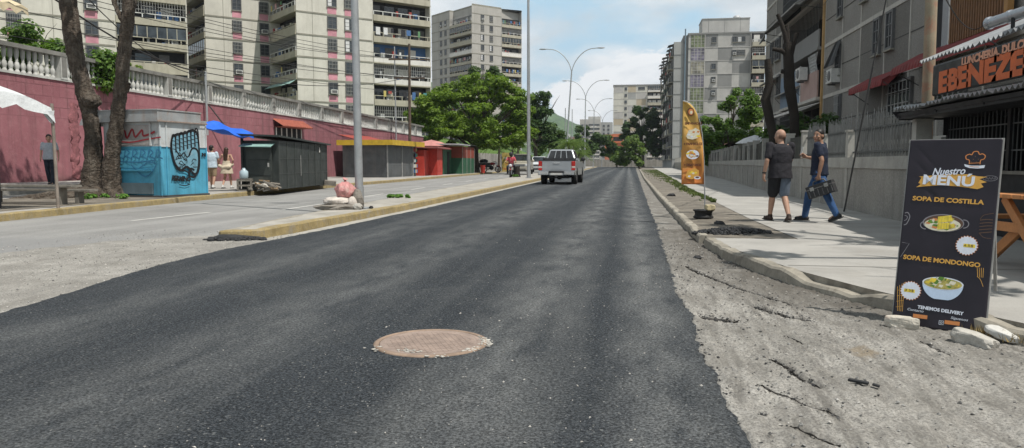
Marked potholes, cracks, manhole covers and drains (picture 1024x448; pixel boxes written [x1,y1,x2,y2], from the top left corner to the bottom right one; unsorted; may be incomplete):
crack [685,266,841,447]
manhole cover [363,329,493,358]
